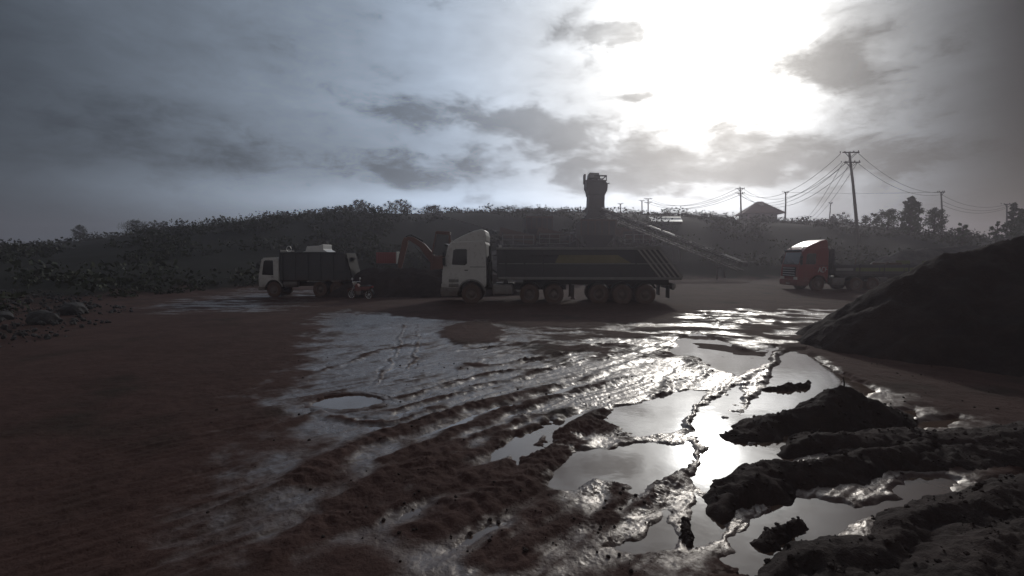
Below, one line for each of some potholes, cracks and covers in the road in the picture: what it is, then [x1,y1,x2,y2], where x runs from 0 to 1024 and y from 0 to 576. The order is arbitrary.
pothole [302,391,393,414]
